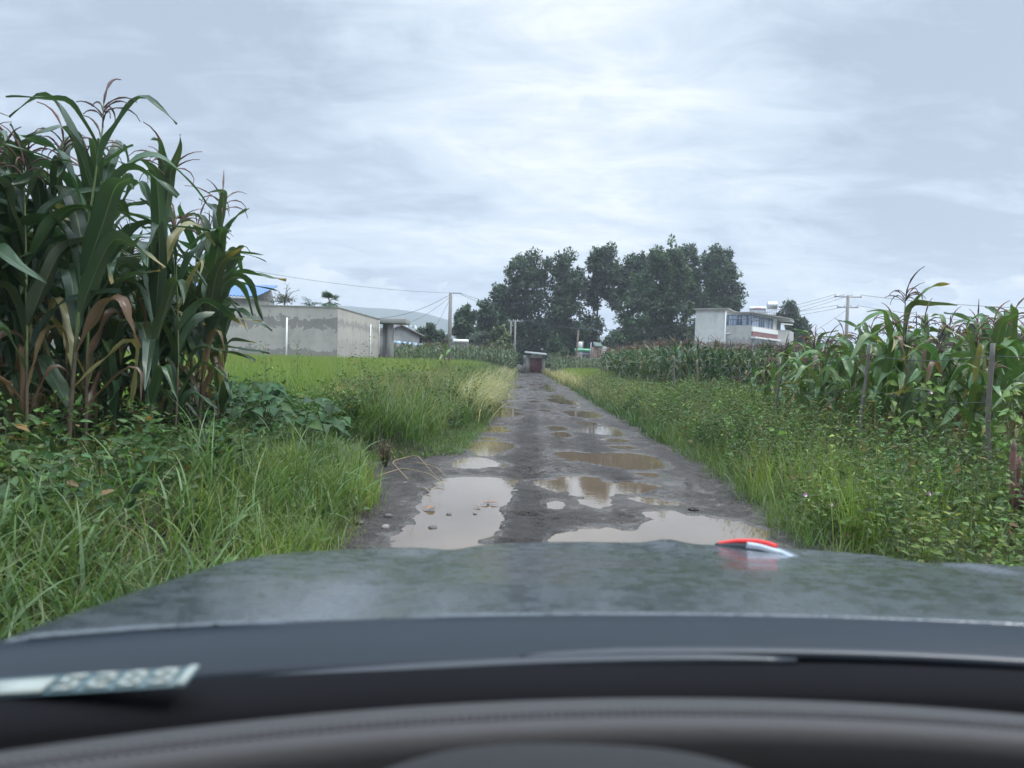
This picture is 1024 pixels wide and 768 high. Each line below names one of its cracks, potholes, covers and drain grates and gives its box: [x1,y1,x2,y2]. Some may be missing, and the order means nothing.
pothole [380,474,520,550]
pothole [543,507,779,545]
pothole [575,425,627,437]
pothole [444,456,511,469]
pothole [462,440,520,457]
pothole [619,494,693,507]
pothole [523,474,665,510]
pothole [550,450,669,470]
